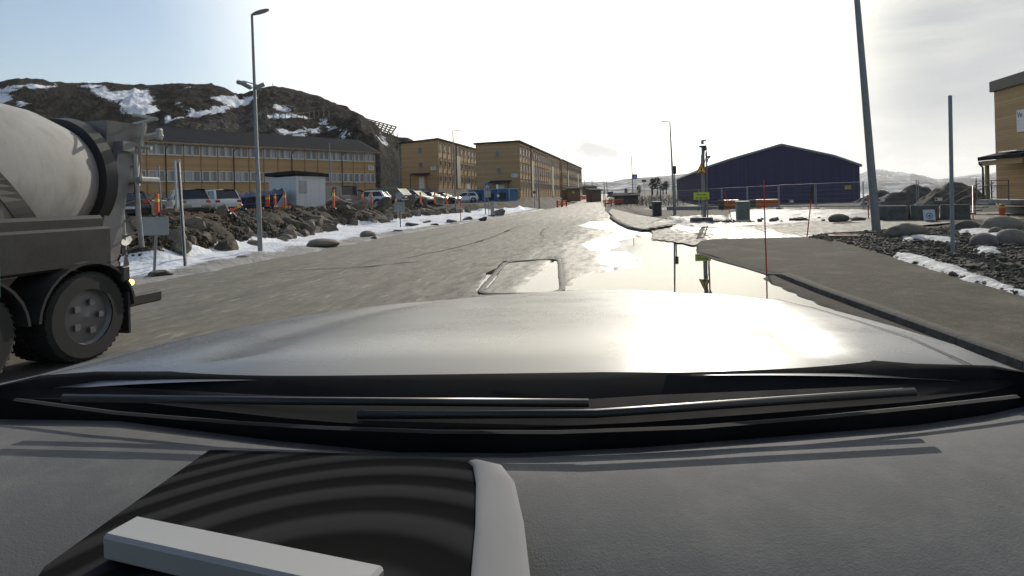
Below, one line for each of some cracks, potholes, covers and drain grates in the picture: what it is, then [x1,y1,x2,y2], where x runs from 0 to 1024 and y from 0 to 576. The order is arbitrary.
crack [280,227,515,271]
